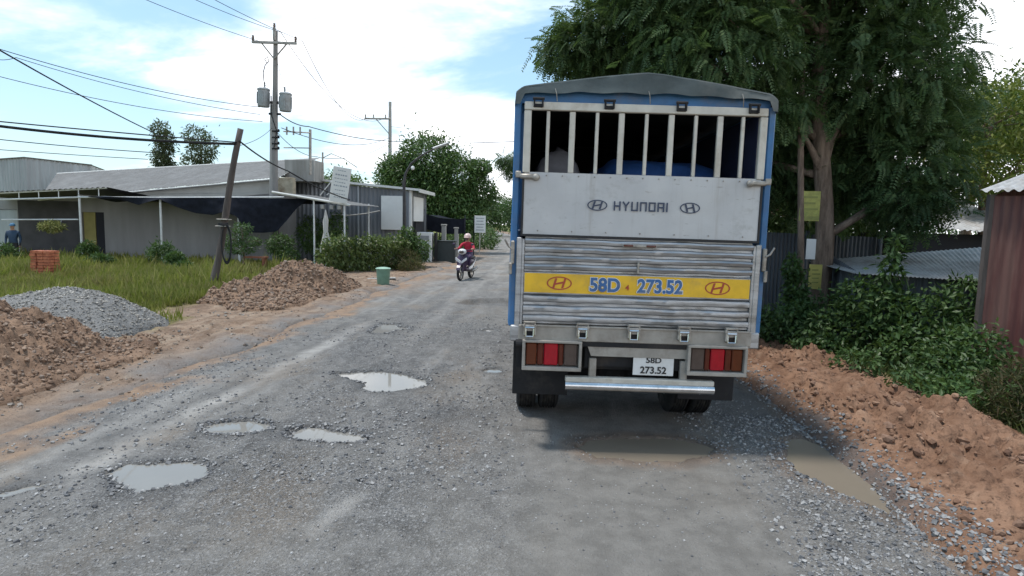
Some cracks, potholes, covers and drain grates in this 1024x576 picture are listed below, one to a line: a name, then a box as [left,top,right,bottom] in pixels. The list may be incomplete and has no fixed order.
pothole [568,434,724,464]
pothole [0,477,59,501]
pothole [99,457,220,495]
pothole [328,369,434,393]
pothole [367,323,411,334]
pothole [199,418,276,436]
pothole [278,424,377,444]
pothole [777,434,901,517]
